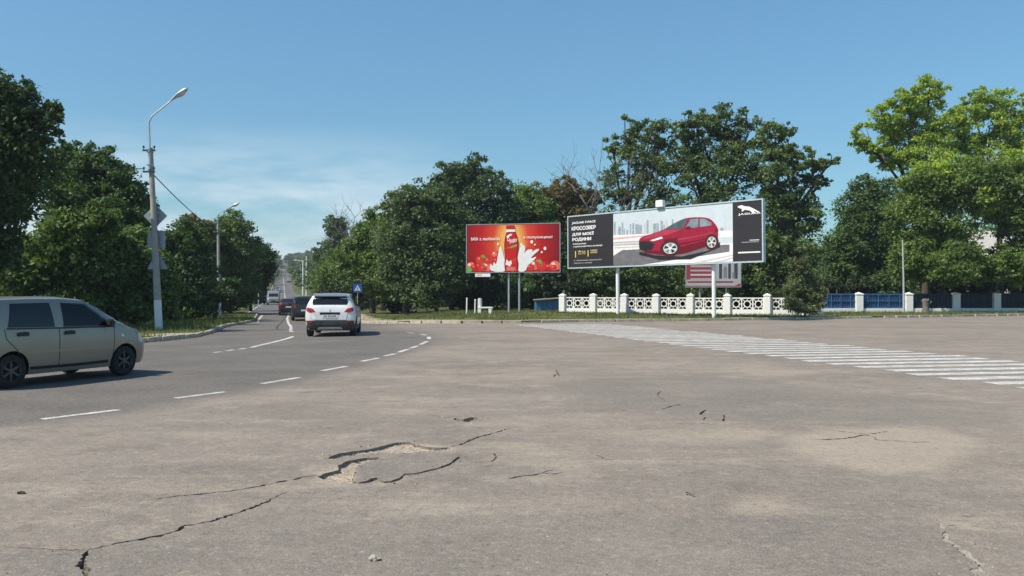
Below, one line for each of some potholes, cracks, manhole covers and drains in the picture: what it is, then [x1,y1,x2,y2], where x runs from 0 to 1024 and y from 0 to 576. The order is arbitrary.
crack [445,428,559,479]
crack [930,515,985,576]
crack [822,430,916,443]
pothole [319,442,461,484]
crack [3,475,317,576]
